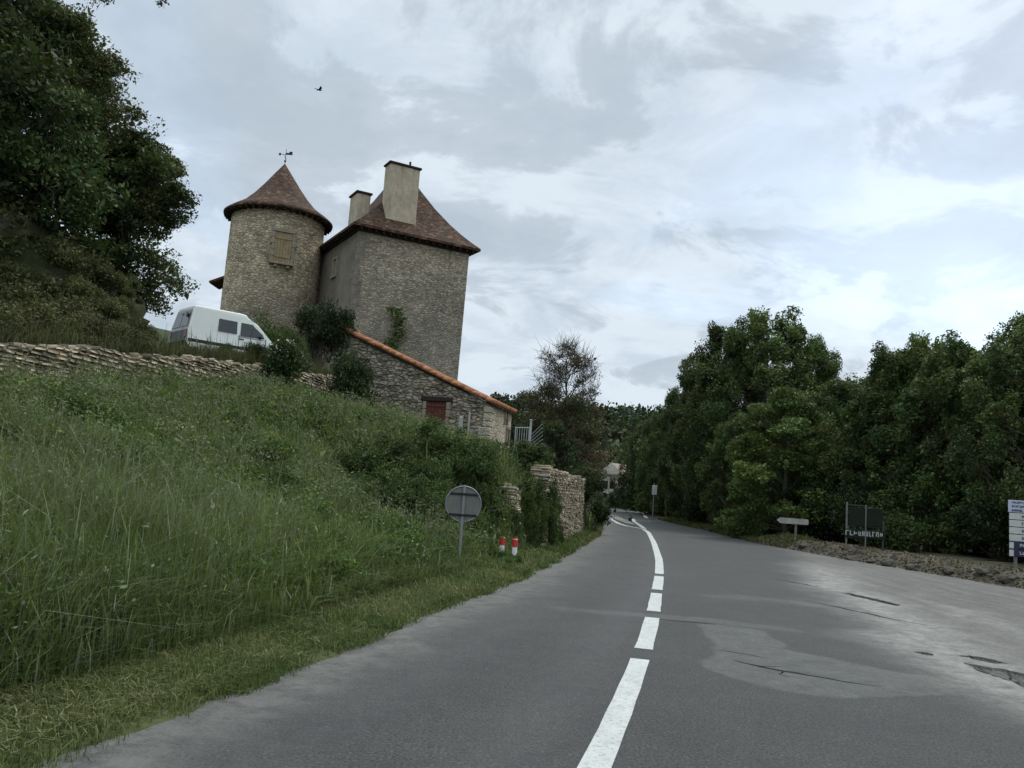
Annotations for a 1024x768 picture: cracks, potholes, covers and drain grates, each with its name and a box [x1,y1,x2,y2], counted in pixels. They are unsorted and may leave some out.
pothole [964,663,1024,687]
crack [788,581,926,626]
crack [721,650,872,686]
pothole [959,655,1008,664]
